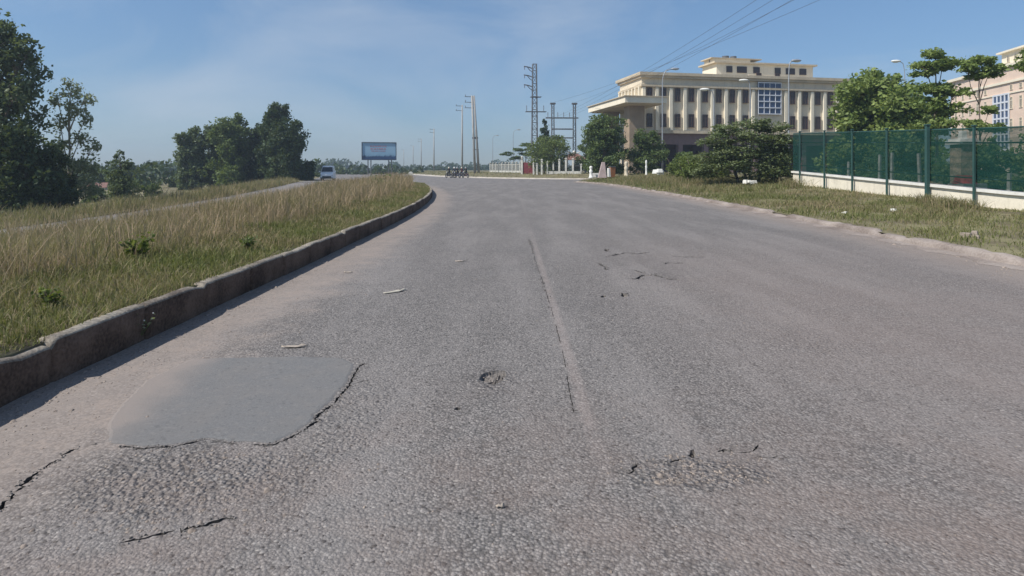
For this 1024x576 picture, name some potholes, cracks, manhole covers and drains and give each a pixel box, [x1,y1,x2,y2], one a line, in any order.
crack [625,443,778,474]
crack [117,515,237,546]
crack [0,443,98,512]
pothole [479,370,507,385]
crack [598,252,703,280]
